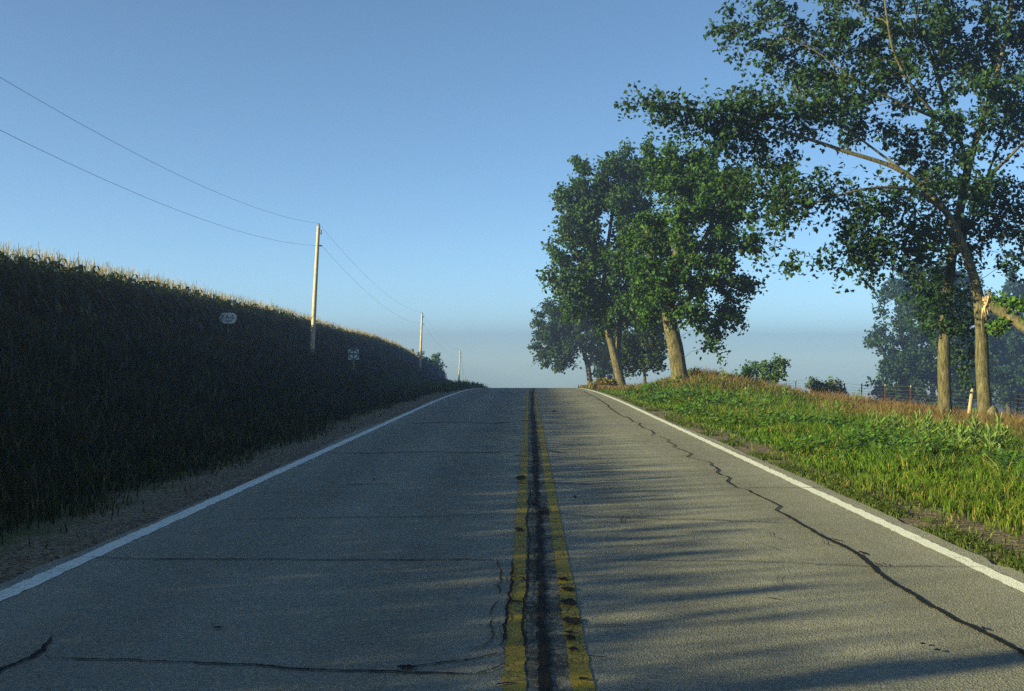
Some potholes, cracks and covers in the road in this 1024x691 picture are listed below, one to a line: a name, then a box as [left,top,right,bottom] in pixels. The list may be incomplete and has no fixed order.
crack [0,388,983,691]
